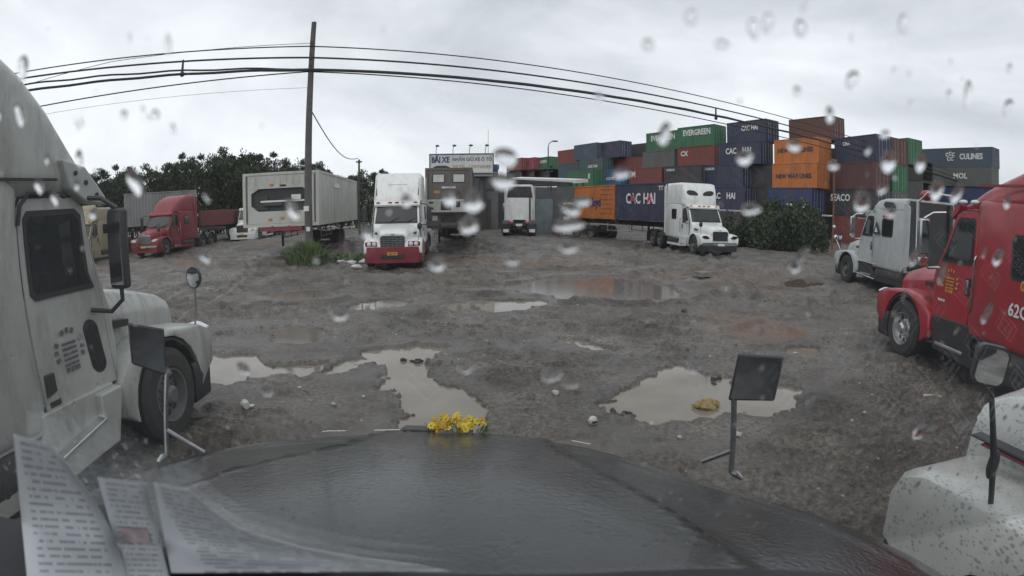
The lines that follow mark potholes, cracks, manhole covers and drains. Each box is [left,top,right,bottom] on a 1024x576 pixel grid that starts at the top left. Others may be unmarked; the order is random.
pothole [349,340,502,434]
pothole [589,360,811,426]
pothole [433,299,482,312]
pothole [344,297,422,311]
pothole [462,297,553,313]
pothole [498,273,692,301]
pothole [210,348,339,386]
pothole [298,355,374,377]
